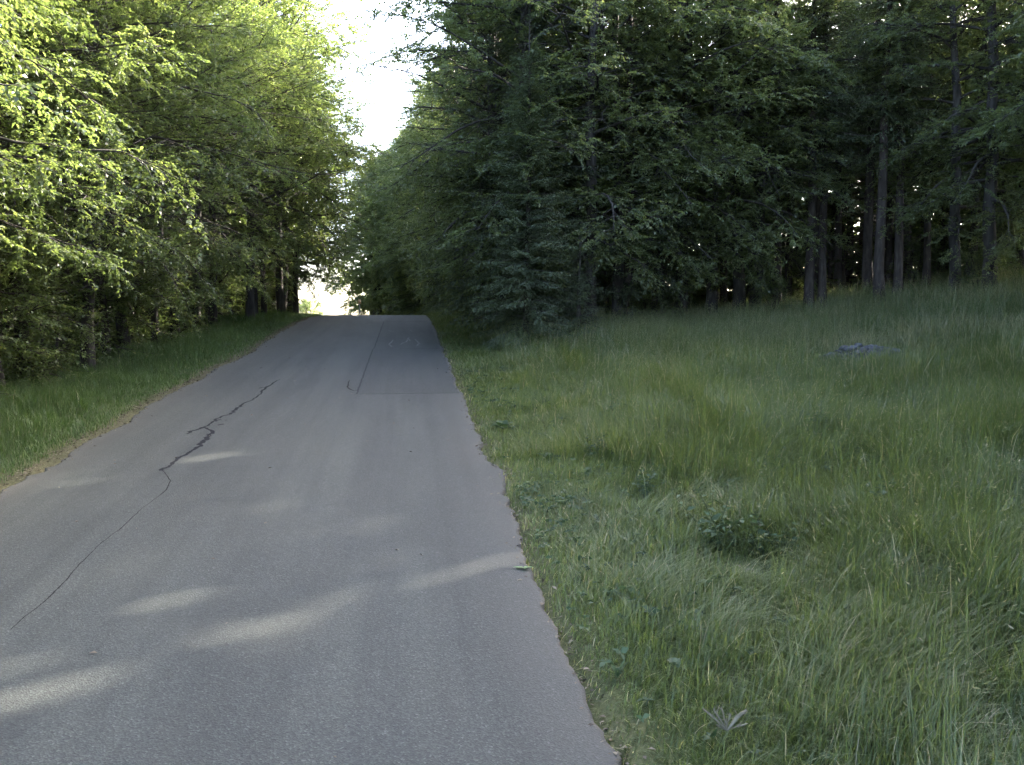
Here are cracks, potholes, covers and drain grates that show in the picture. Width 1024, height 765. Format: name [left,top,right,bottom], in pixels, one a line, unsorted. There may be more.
crack [11,379,280,629]
